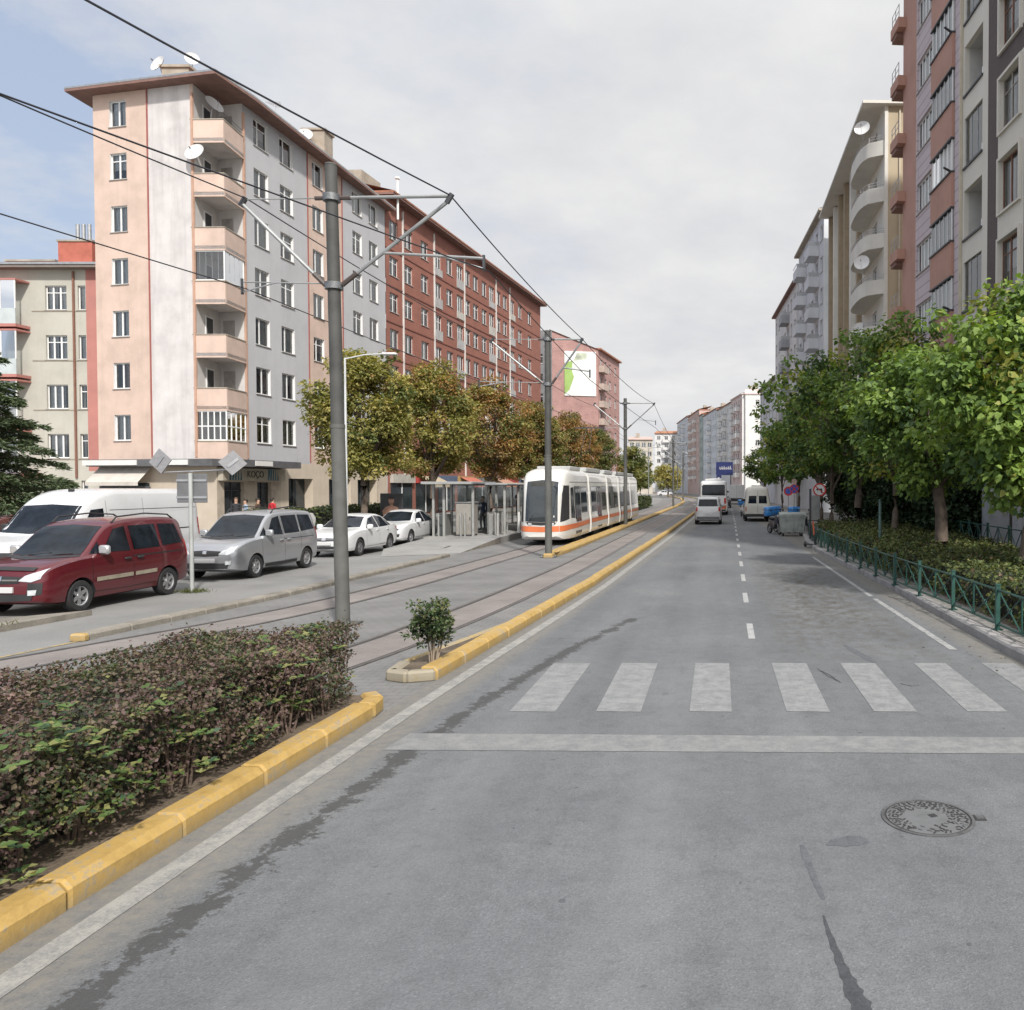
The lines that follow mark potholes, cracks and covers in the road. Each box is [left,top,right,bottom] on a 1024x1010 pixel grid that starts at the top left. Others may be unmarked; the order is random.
manhole cover [881,799,987,837]
